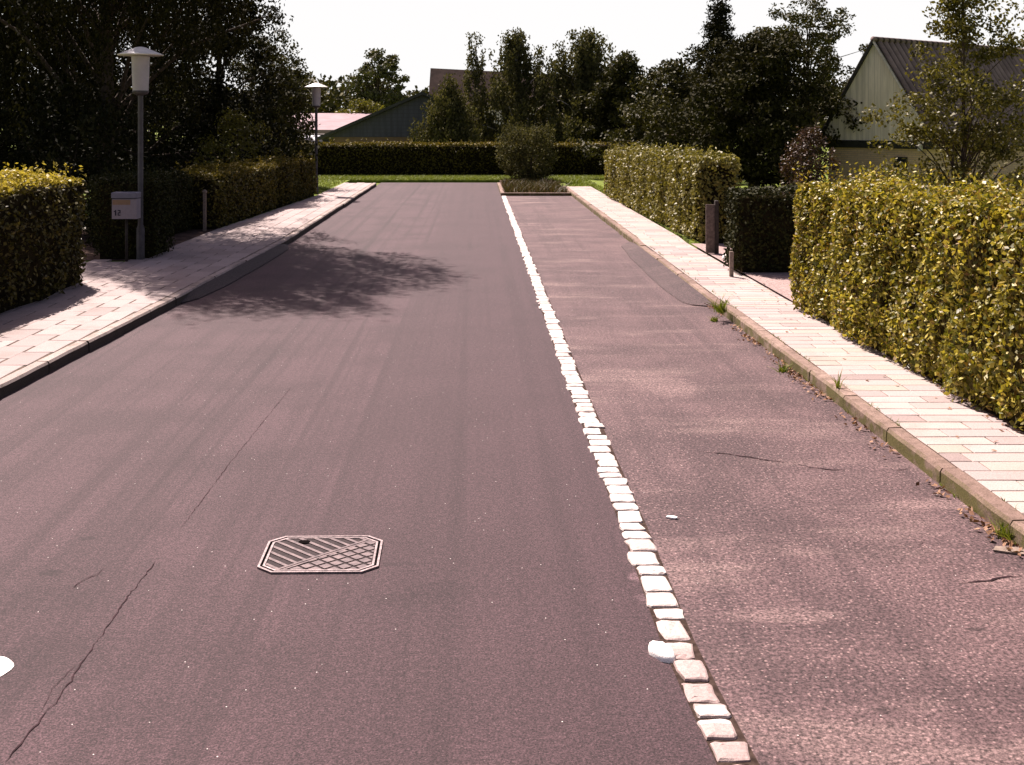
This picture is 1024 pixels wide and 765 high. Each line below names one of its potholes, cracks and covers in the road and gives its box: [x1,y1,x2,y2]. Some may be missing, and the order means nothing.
crack [940,562,1023,583]
crack [5,391,288,762]
crack [706,451,840,470]
